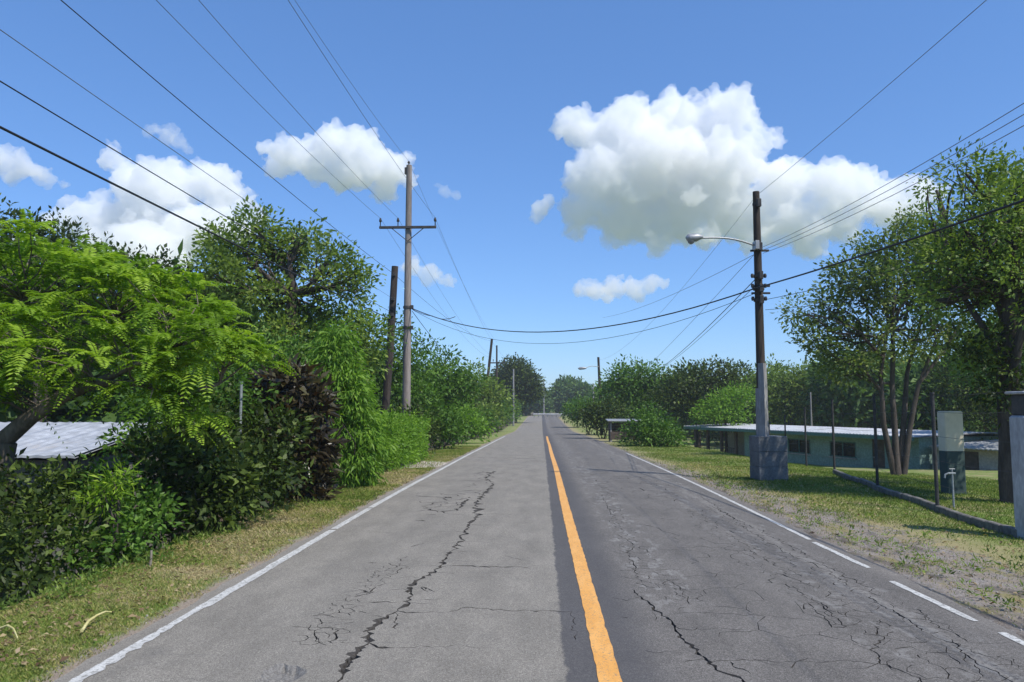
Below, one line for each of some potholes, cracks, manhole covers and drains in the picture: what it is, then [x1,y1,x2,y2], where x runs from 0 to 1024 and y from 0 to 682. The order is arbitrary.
crack [292,457,576,682]
crack [591,474,1024,682]
